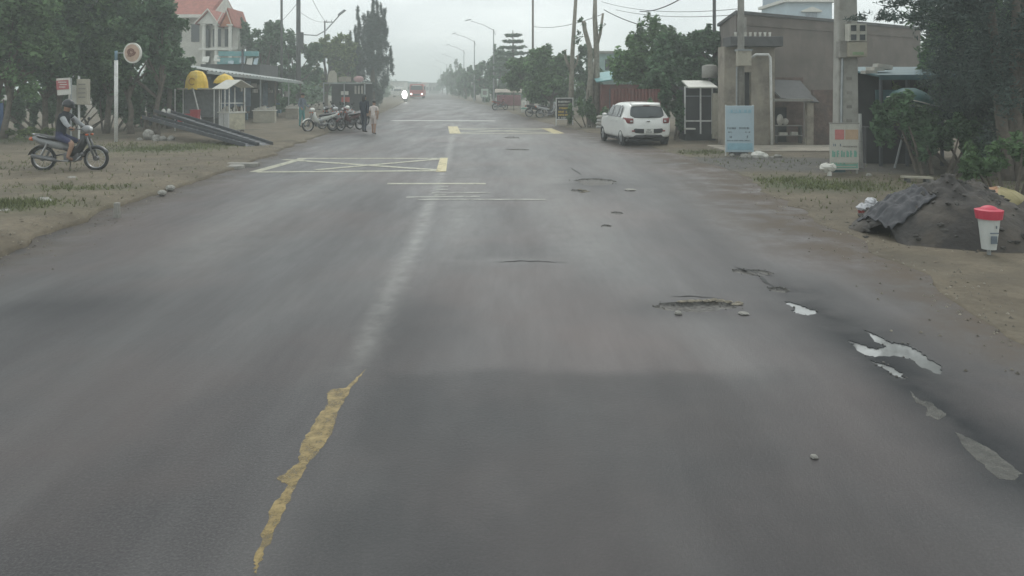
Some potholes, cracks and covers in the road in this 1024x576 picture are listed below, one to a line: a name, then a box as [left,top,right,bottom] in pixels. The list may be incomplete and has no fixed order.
pothole [849,330,942,374]
crack [737,267,775,287]
pothole [652,298,743,313]
pothole [784,301,818,315]
pothole [871,360,908,379]
pothole [573,178,617,186]
